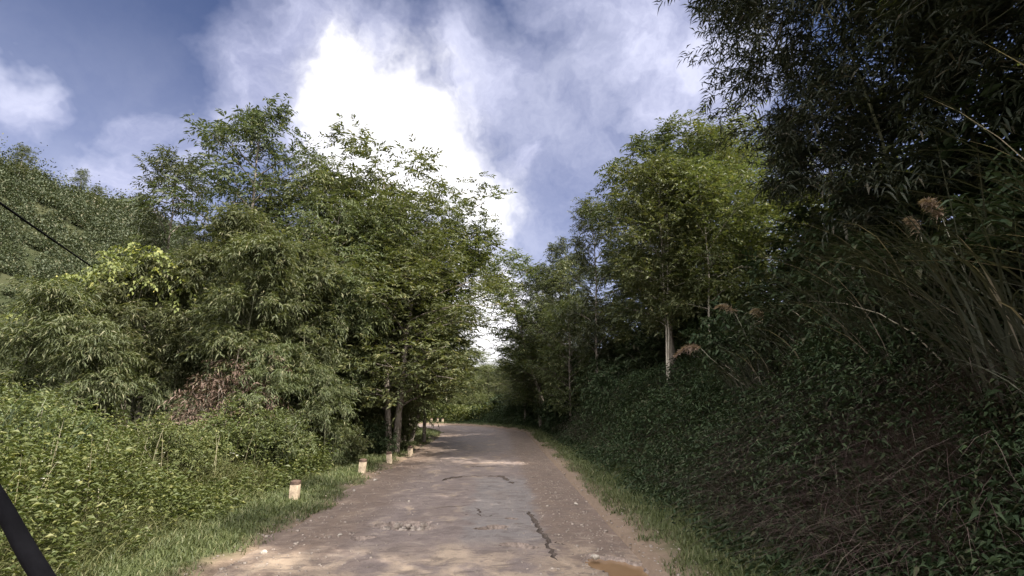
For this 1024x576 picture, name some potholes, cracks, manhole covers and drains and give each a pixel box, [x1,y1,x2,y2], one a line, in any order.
crack [442,466,515,487]
crack [515,511,565,561]
pothole [581,554,649,576]
pothole [366,521,438,531]
